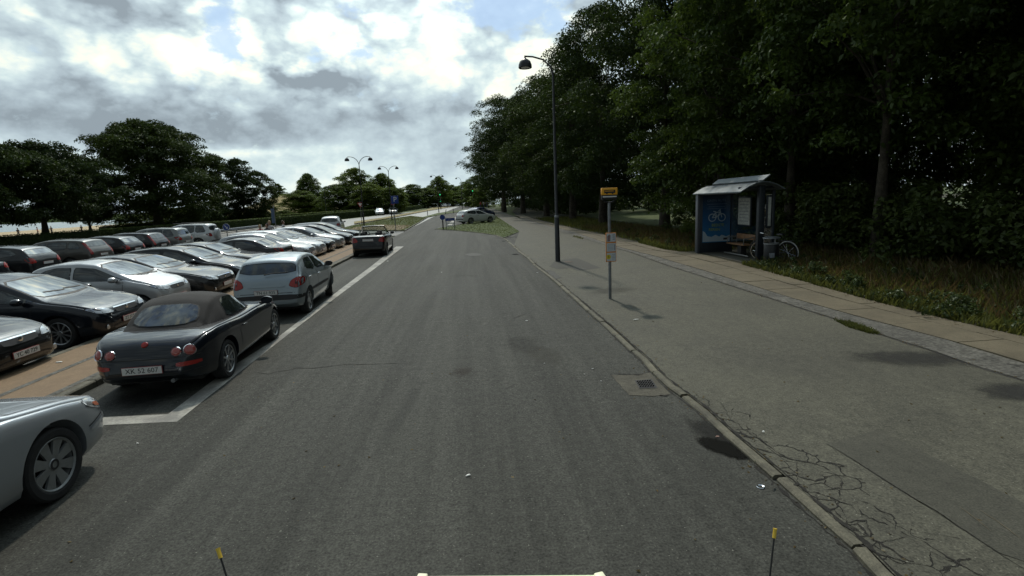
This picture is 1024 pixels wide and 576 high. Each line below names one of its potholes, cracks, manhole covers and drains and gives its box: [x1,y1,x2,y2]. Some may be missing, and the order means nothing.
crack [692,394,981,576]
drain grate [635,379,657,388]
